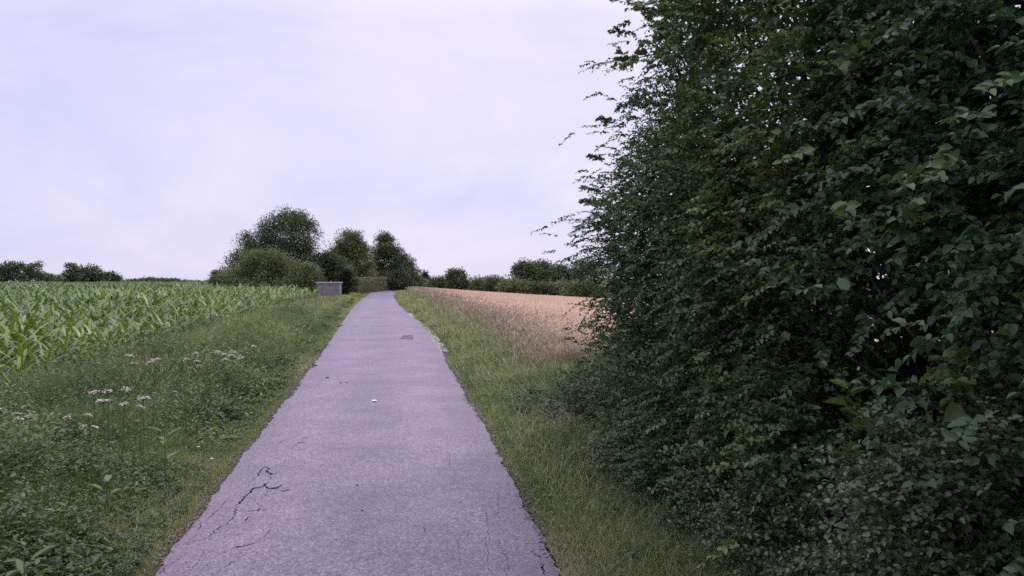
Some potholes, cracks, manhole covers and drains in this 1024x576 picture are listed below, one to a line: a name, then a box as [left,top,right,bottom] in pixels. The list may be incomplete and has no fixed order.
crack [484,493,509,574]
crack [159,438,304,575]
